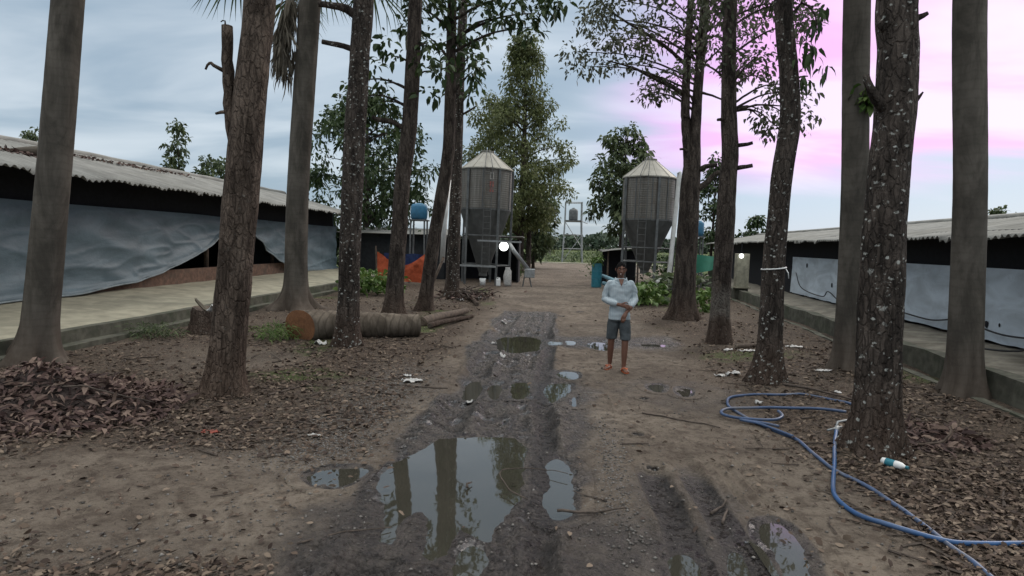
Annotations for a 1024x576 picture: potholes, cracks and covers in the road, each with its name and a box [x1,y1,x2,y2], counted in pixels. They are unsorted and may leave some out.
pothole [525,450,595,533]
pothole [667,384,705,400]
pothole [545,368,590,382]
pothole [635,381,673,395]
pothole [536,379,584,407]
pothole [284,459,380,496]
pothole [349,428,542,576]
pothole [451,378,493,405]
pothole [488,334,550,354]
pothole [481,381,506,402]
pothole [501,378,540,403]
pothole [730,509,846,576]
